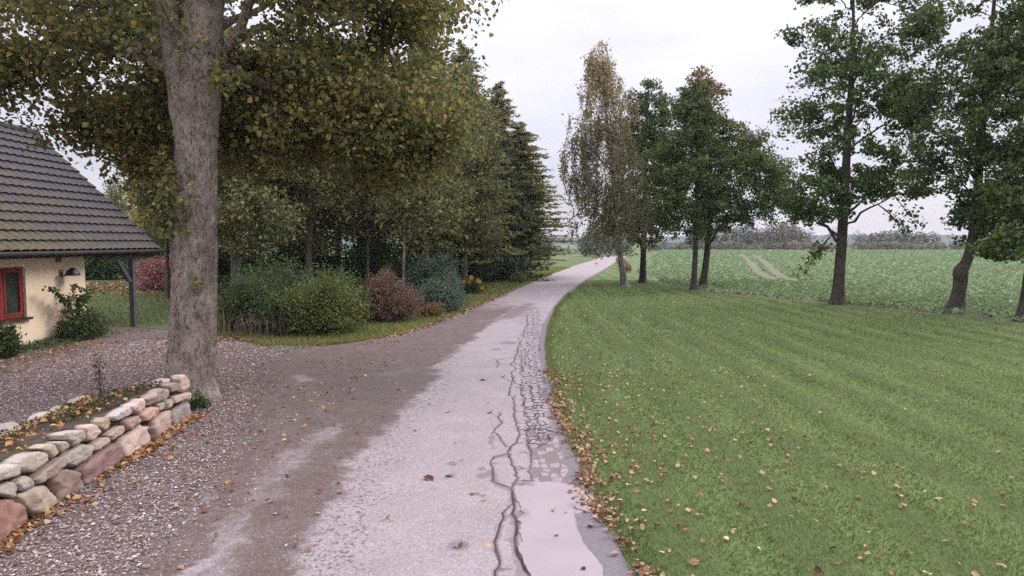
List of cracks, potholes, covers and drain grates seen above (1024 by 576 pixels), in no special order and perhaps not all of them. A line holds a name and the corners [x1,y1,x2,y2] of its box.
crack [490,310,557,576]
